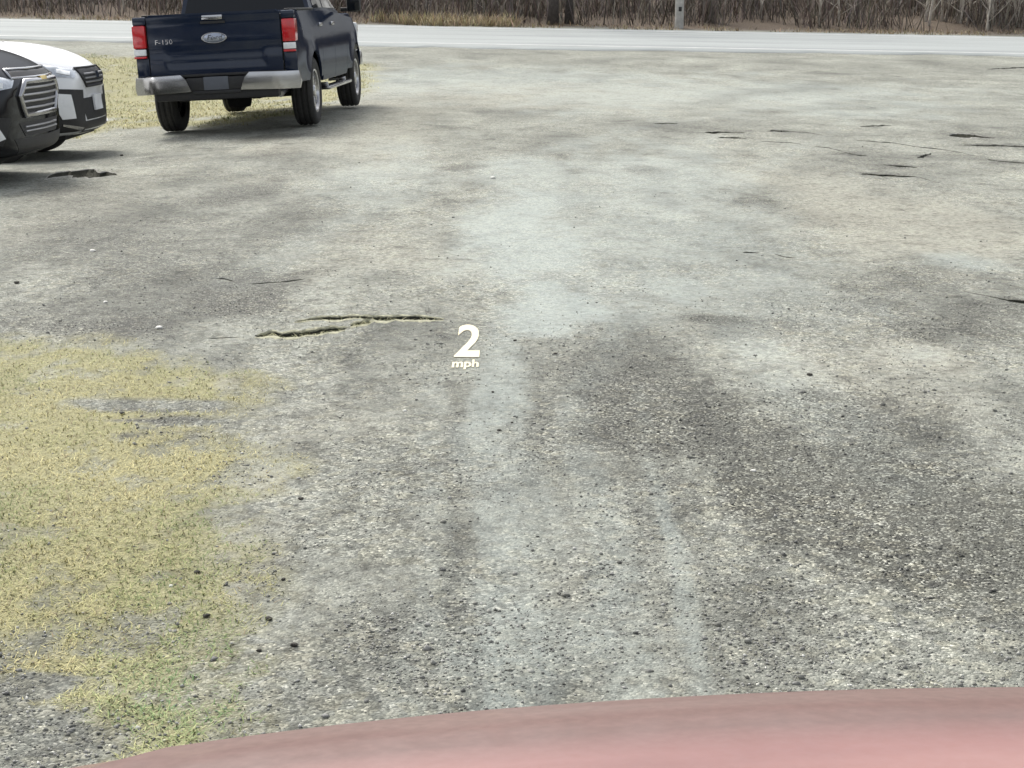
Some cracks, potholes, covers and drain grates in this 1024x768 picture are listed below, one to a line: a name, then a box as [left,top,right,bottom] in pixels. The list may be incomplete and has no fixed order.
crack [764,125,1024,183]
crack [965,291,1024,304]
pothole [44,168,117,180]
crack [705,131,745,139]
crack [255,314,444,340]
